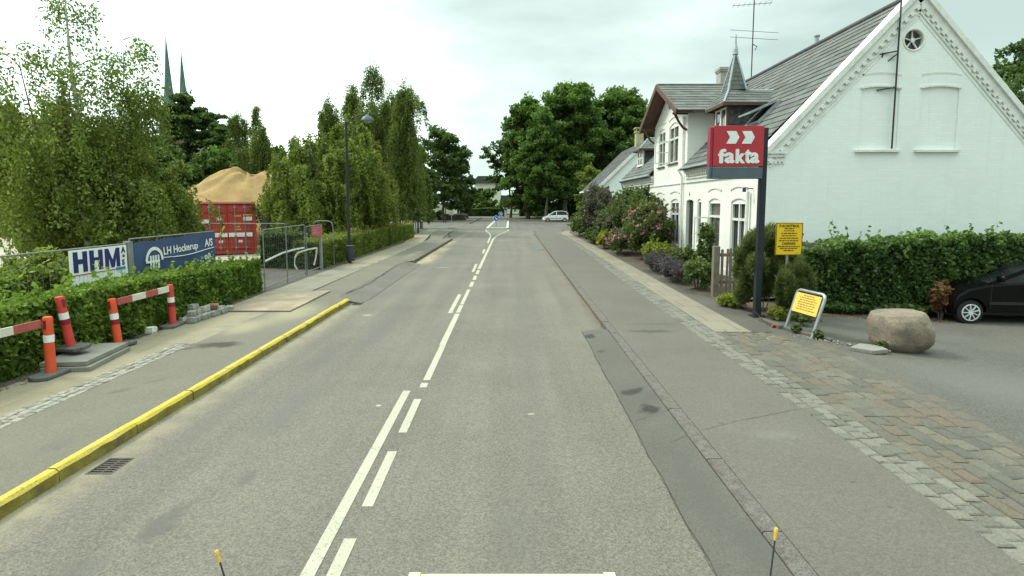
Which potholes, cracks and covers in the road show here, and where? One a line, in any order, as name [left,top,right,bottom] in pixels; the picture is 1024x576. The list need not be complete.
drain grate [84,458,135,475]
